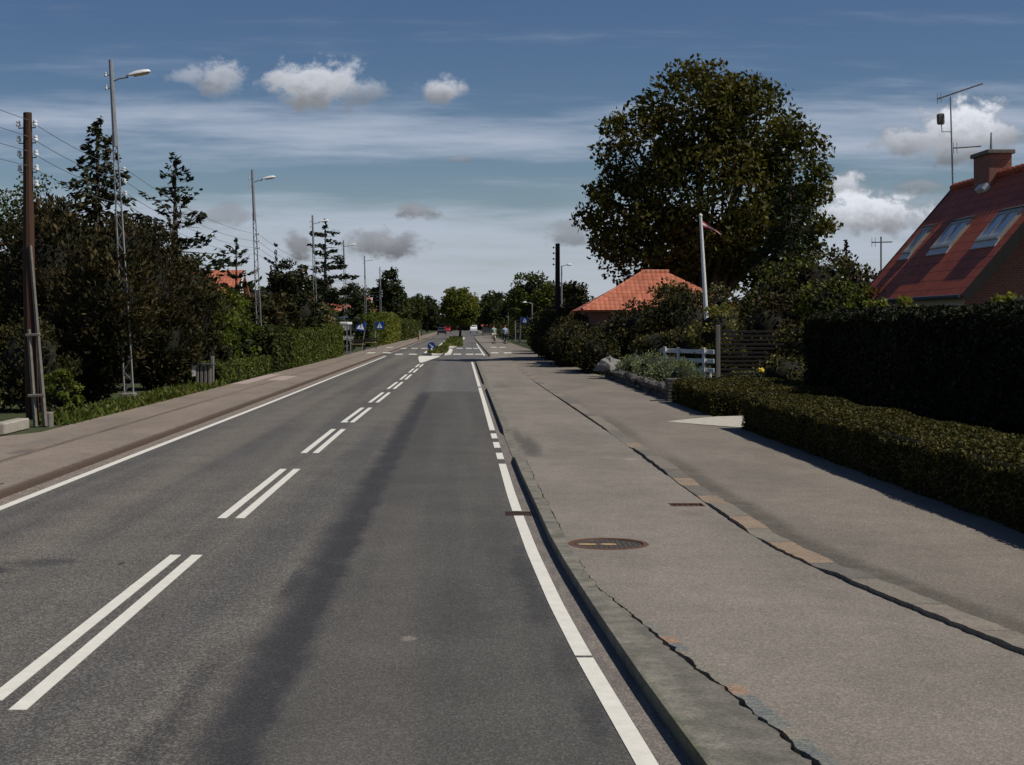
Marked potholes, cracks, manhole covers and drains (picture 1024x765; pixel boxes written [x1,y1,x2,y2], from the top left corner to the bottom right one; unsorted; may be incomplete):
manhole cover [568,538,649,550]
